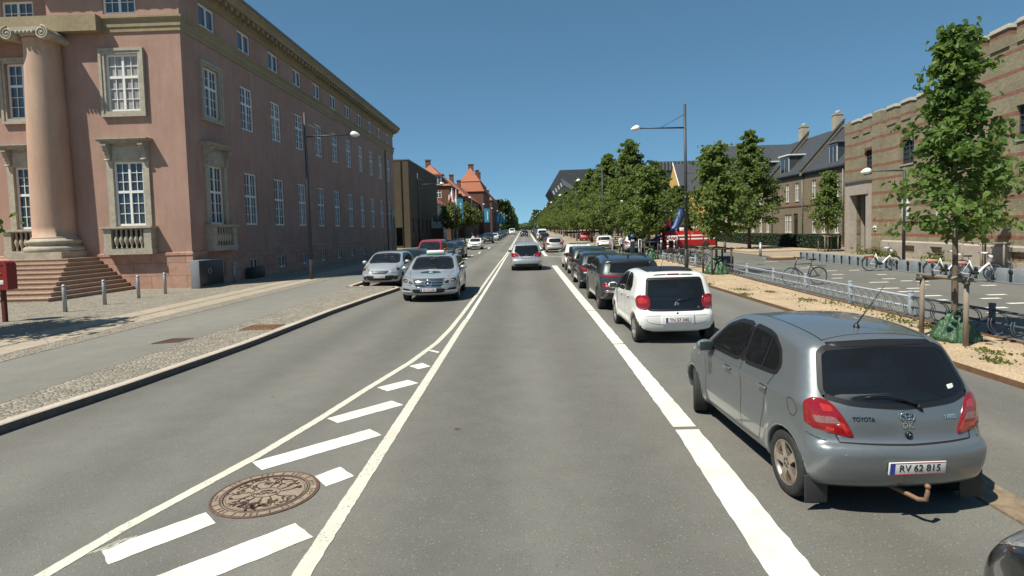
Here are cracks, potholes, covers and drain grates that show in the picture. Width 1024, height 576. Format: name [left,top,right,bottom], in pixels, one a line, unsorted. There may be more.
manhole cover [208,471,320,519]
